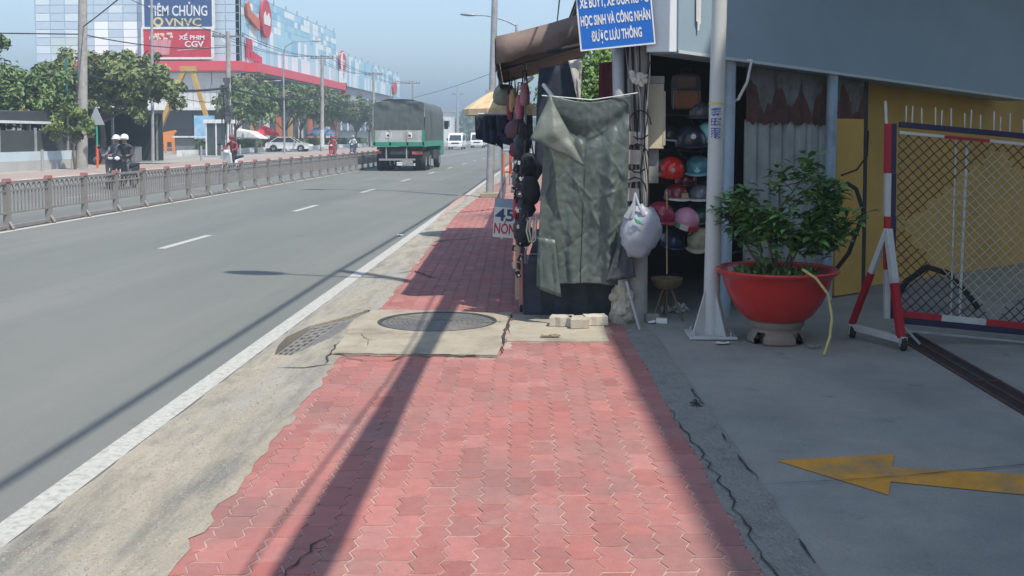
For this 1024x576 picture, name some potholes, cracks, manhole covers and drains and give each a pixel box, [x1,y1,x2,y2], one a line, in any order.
crack [285,313,513,368]
drain grate [276,313,365,355]
crack [672,410,780,576]
manhole cover [377,311,501,331]
